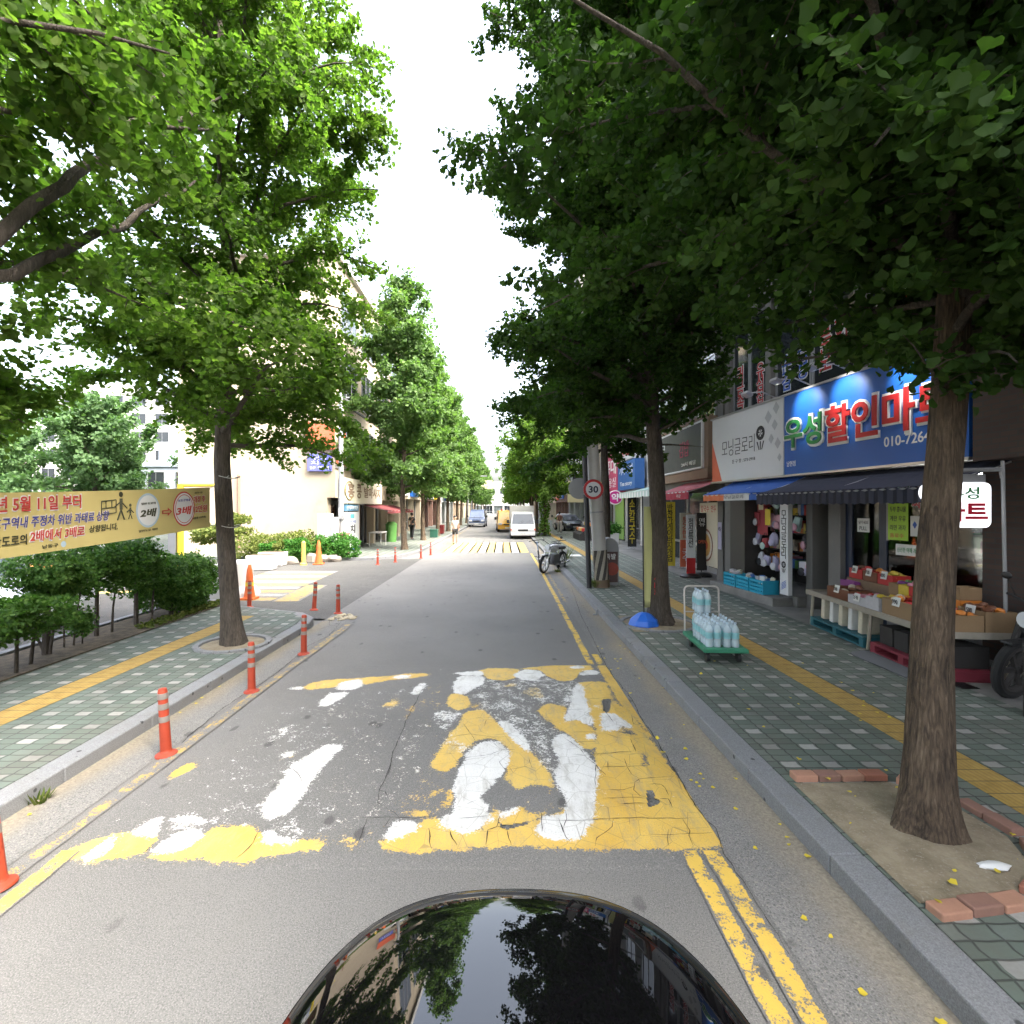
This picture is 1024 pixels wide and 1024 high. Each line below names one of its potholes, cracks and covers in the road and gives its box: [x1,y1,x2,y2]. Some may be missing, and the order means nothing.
pothole [646,790,660,807]
